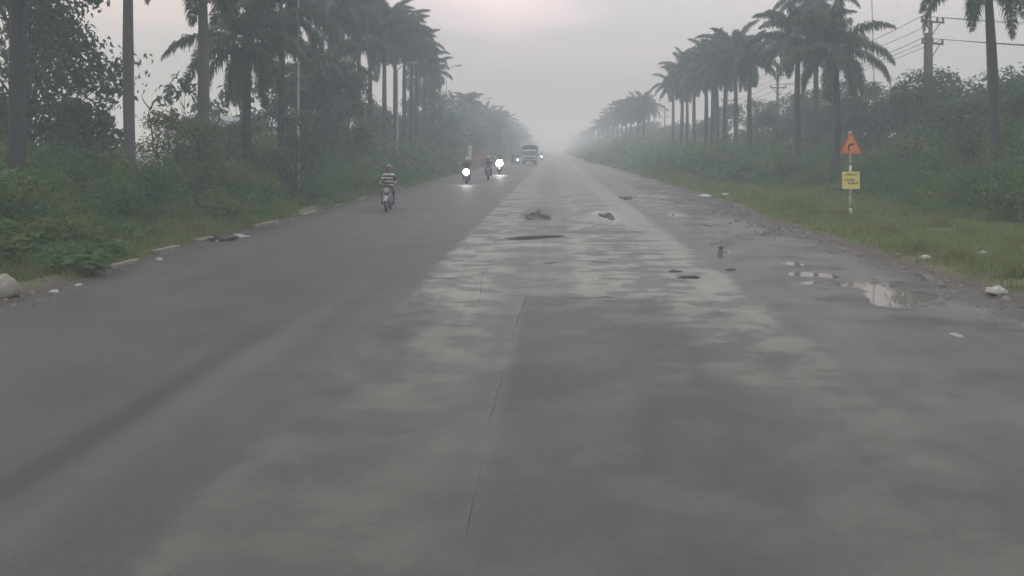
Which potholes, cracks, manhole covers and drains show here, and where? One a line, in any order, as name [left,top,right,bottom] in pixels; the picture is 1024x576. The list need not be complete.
pothole [524,209,551,221]
pothole [592,210,620,222]
